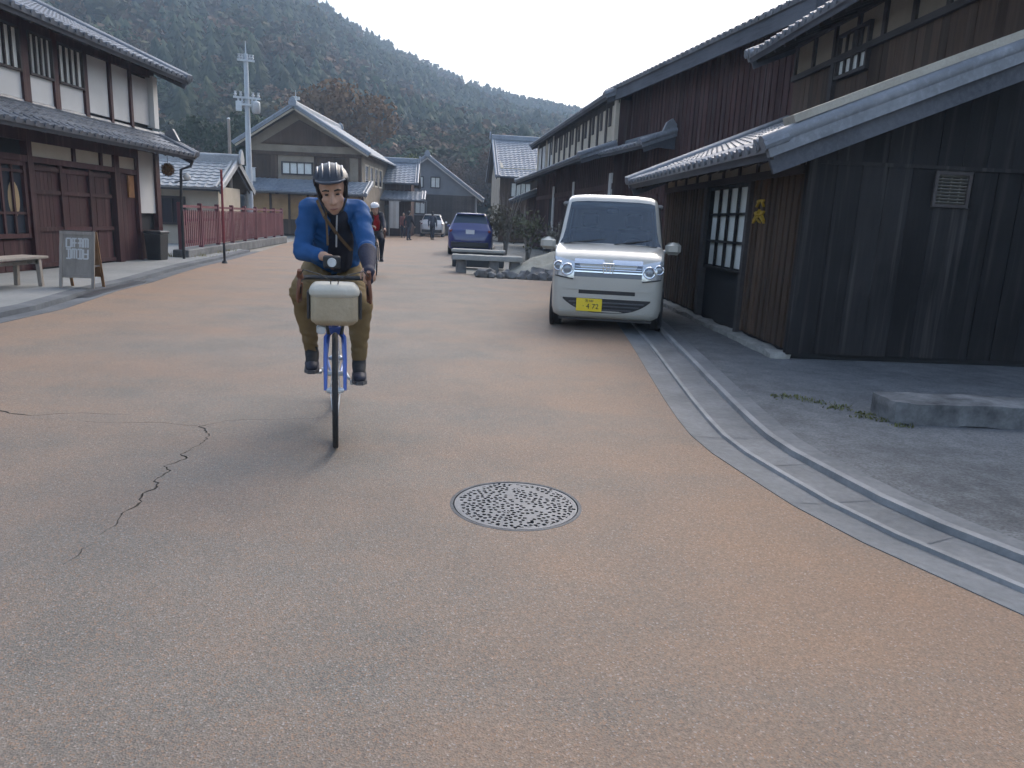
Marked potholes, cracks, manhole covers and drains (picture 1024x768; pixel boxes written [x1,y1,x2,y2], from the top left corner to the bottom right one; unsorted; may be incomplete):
manhole cover [450,481,582,531]
crack [0,410,325,565]
